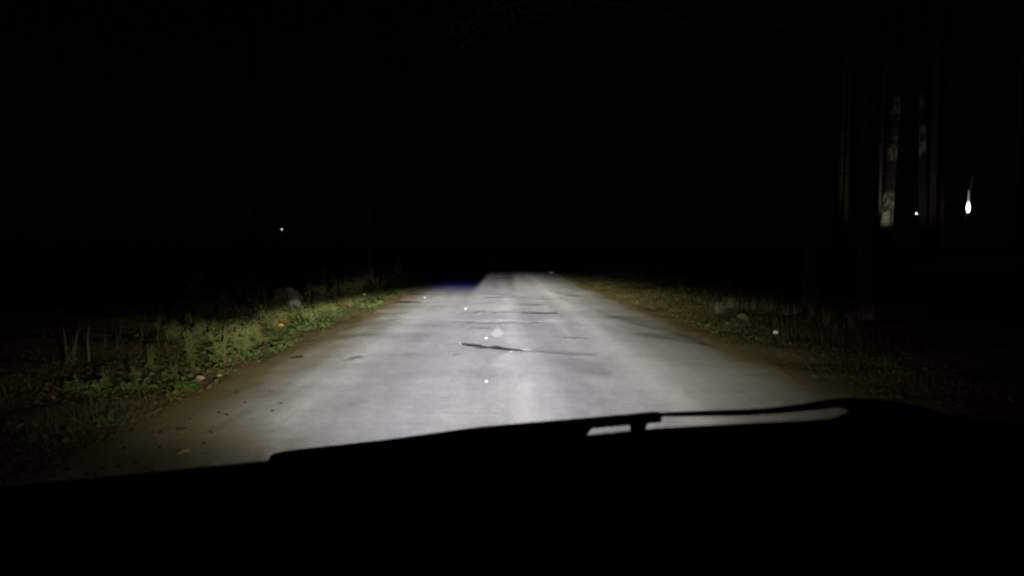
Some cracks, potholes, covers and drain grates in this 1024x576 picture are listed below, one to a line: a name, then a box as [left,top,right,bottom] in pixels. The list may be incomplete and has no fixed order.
crack [426,285,582,328]
